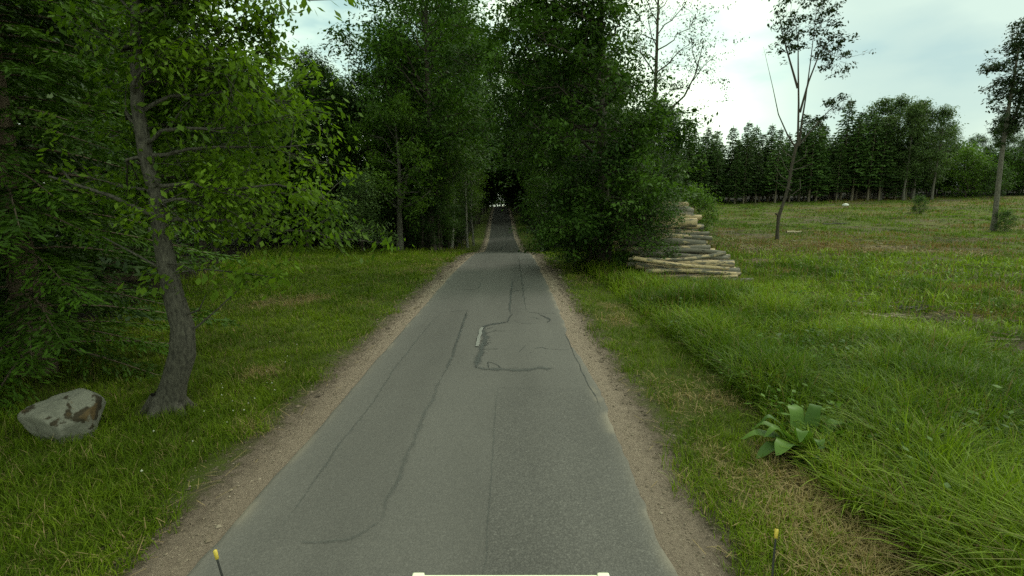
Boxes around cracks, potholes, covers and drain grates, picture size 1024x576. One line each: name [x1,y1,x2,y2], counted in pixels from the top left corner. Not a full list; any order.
crack [474,282,598,402]
